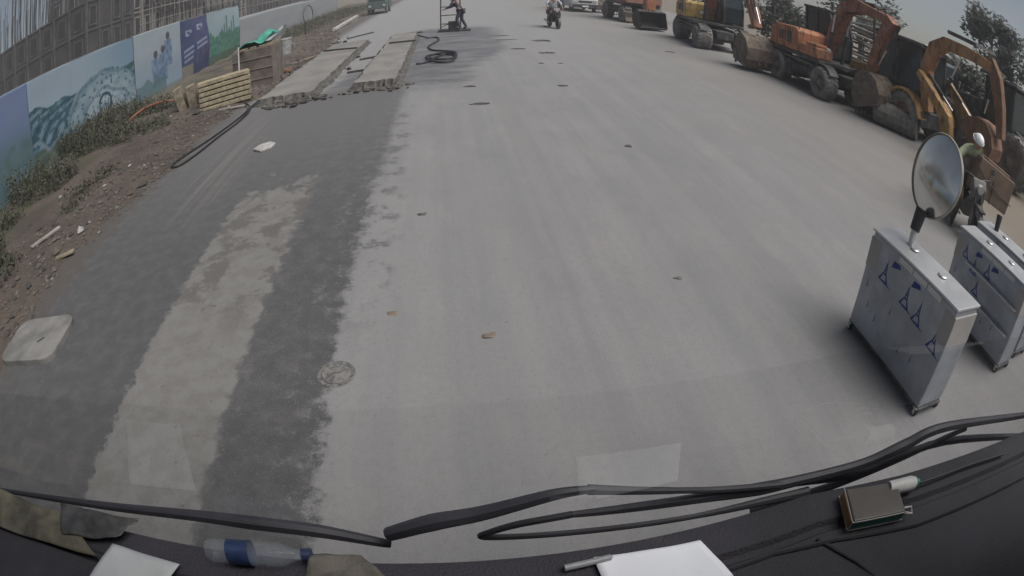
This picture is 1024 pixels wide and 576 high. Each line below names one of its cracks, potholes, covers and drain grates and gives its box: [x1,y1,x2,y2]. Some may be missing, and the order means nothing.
manhole cover [2,315,74,366]
manhole cover [317,361,356,387]
